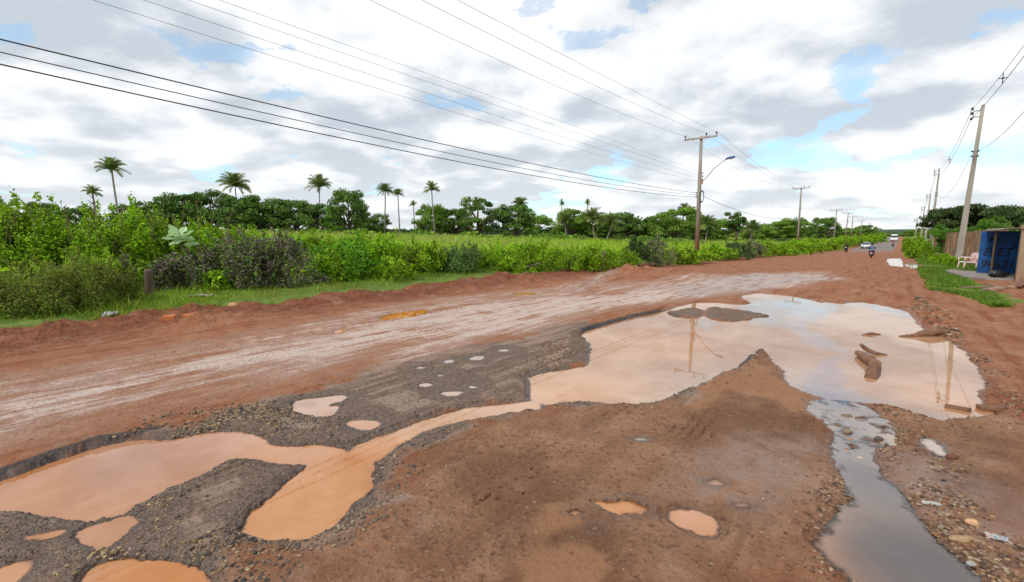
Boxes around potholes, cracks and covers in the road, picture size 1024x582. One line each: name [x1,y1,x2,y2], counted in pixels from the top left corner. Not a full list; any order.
pothole [656,491,752,554]
pothole [55,500,171,562]
pothole [346,392,553,465]
pothole [371,307,436,321]
pothole [562,483,660,532]
pothole [509,290,1024,427]
pothole [204,453,402,557]
pothole [274,387,364,421]
pothole [45,531,251,582]
pothole [0,543,63,582]
